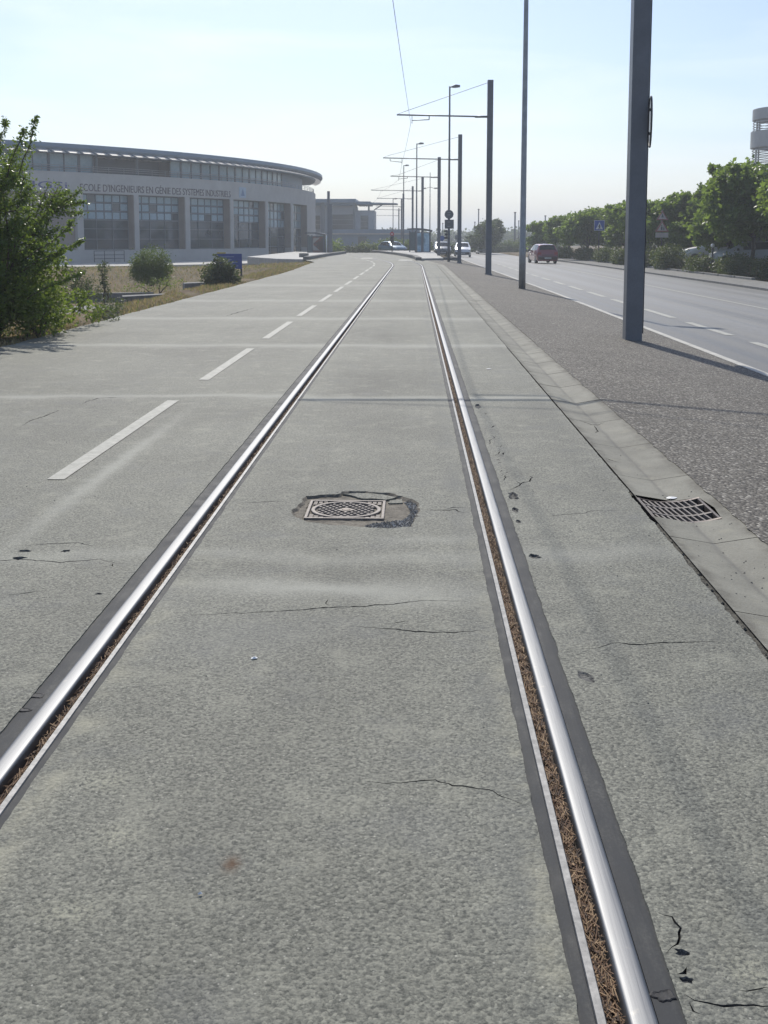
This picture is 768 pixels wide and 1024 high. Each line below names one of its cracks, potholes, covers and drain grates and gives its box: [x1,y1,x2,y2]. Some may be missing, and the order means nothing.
drain grate [635,496,722,527]
crack [649,913,768,1014]
crack [0,543,114,566]
crack [366,780,524,805]
crack [489,426,533,489]
crack [583,522,768,660]
manhole cover [304,500,386,521]
crack [182,600,488,633]
